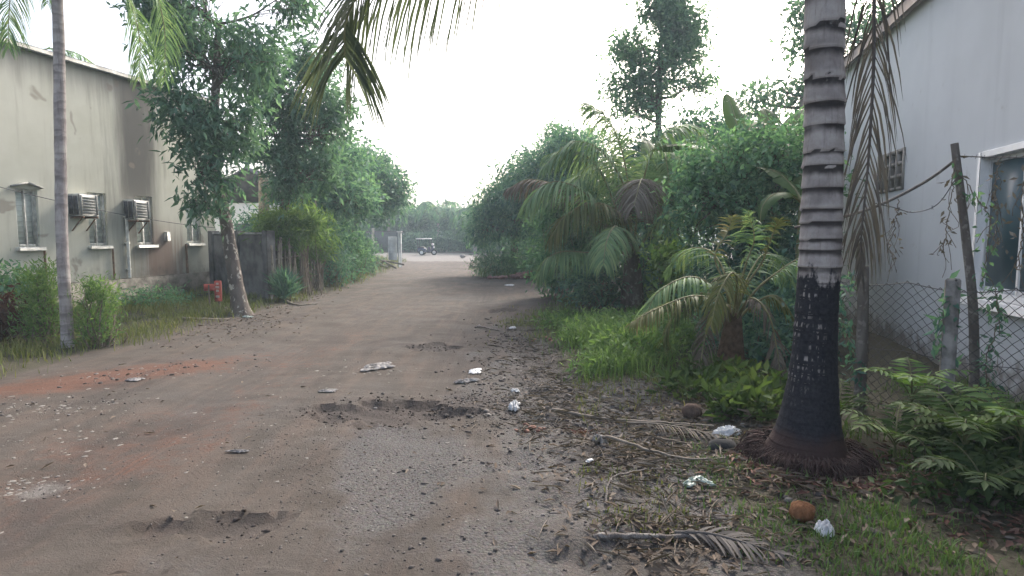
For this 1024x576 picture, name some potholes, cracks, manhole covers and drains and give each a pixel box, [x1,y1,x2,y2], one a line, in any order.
pothole [120,510,301,544]
pothole [396,341,464,354]
pothole [278,396,490,430]
